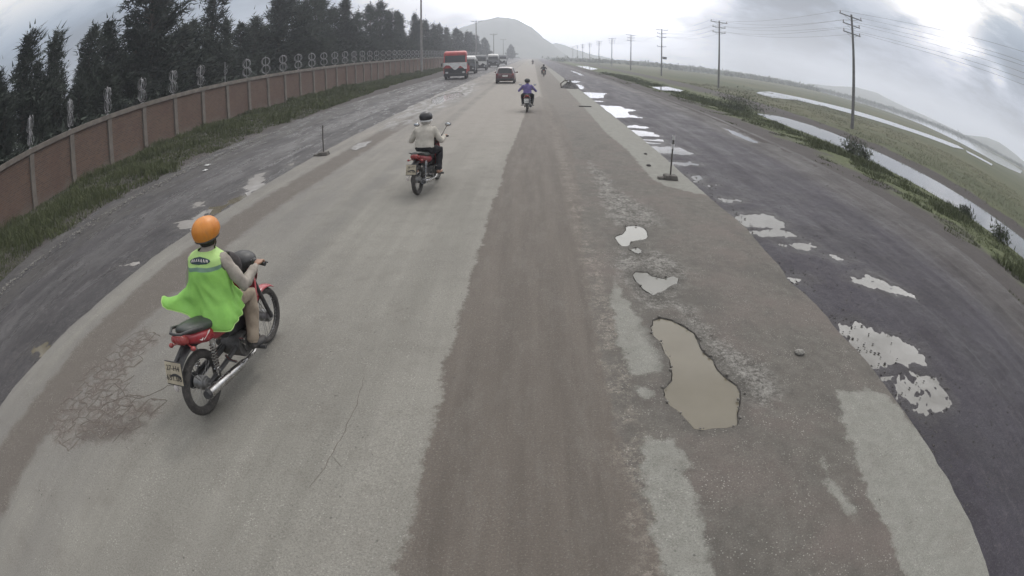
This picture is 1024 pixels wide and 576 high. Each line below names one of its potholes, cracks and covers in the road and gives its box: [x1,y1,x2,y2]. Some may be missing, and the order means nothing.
pothole [650,315,746,430]
pothole [632,271,680,295]
pothole [615,224,648,246]
crack [309,385,363,488]
crack [49,331,168,451]
